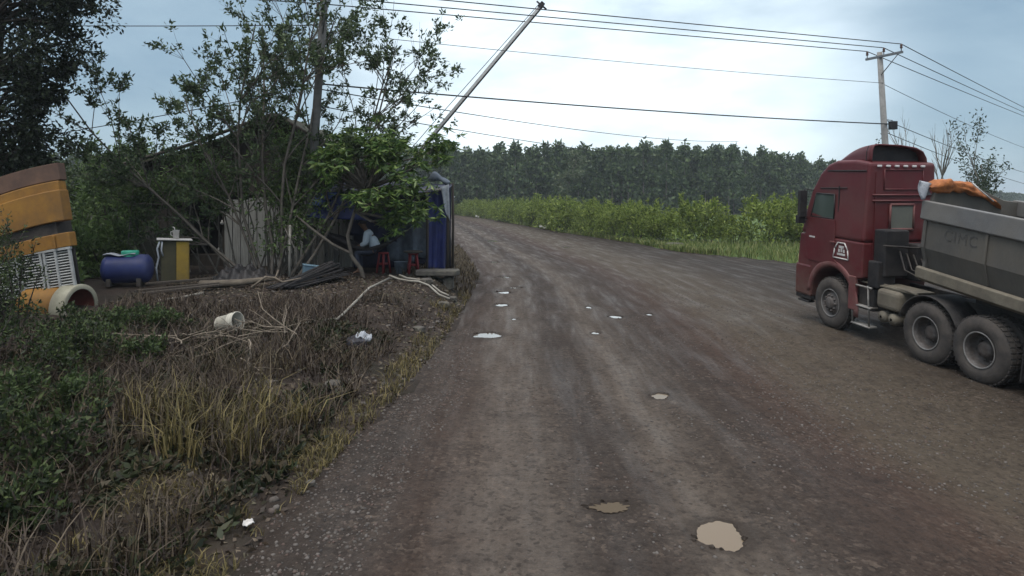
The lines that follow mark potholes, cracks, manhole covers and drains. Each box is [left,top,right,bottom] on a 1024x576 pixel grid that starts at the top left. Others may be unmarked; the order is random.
pothole [691,519,748,553]
pothole [580,498,633,515]
